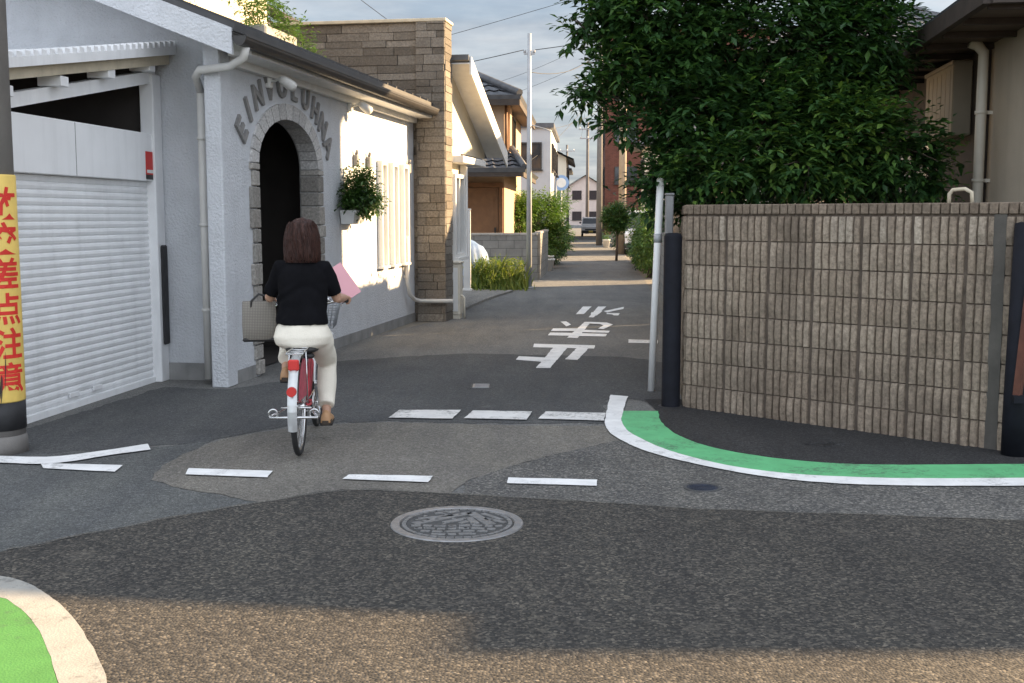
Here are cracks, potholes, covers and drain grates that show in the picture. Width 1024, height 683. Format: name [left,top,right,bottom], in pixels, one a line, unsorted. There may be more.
manhole cover [683,483,722,492]
manhole cover [390,506,524,542]
